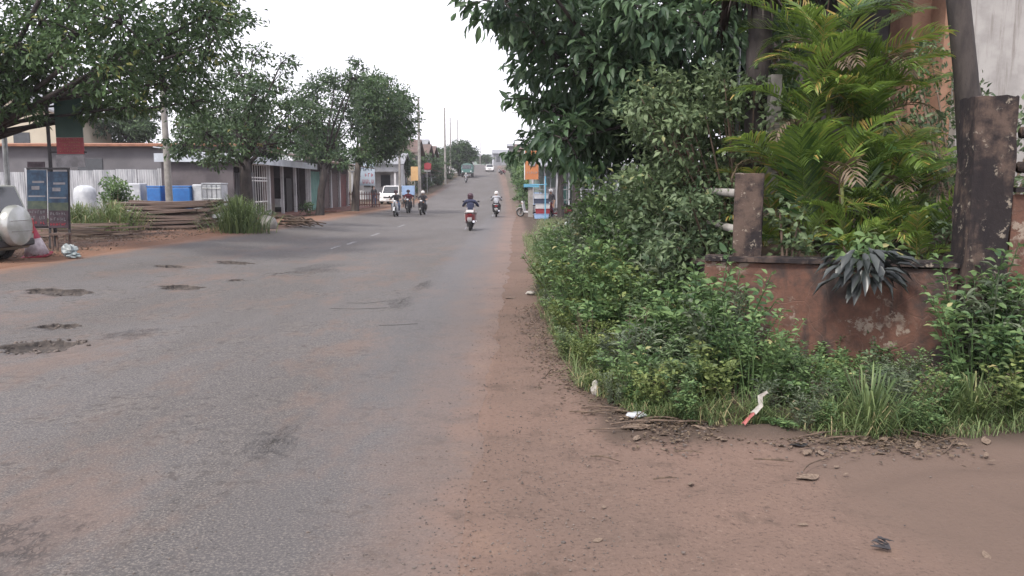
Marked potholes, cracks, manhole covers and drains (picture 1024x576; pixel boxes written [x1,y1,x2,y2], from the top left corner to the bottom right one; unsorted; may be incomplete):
pothole [21,322,98,333]
pothole [0,338,104,359]
pothole [145,284,217,292]
pothole [8,287,108,299]
